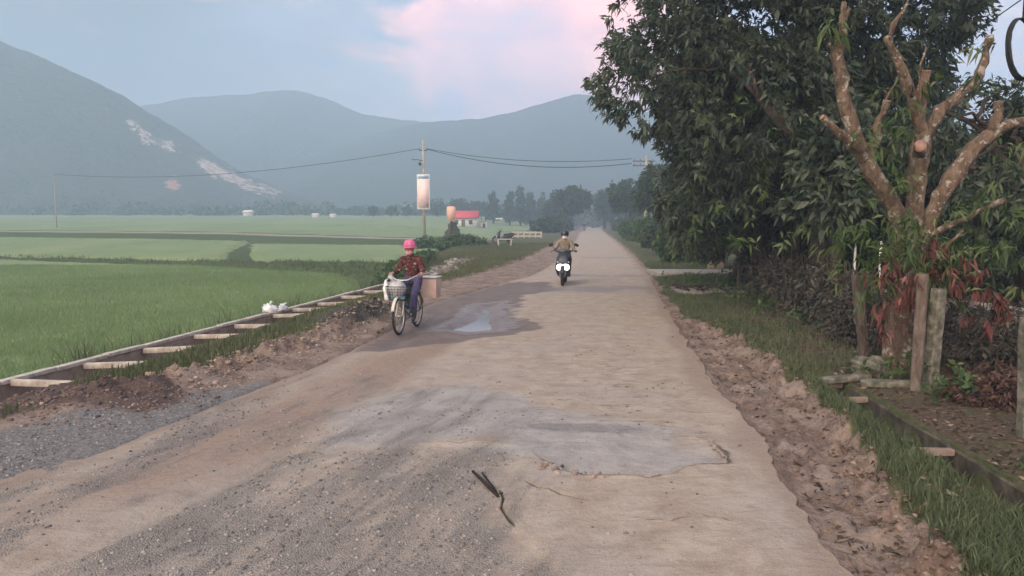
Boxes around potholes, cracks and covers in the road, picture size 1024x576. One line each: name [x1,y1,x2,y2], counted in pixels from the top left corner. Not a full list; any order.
crack [631,507,748,528]
pothole [427,302,513,334]
crack [488,477,603,534]
